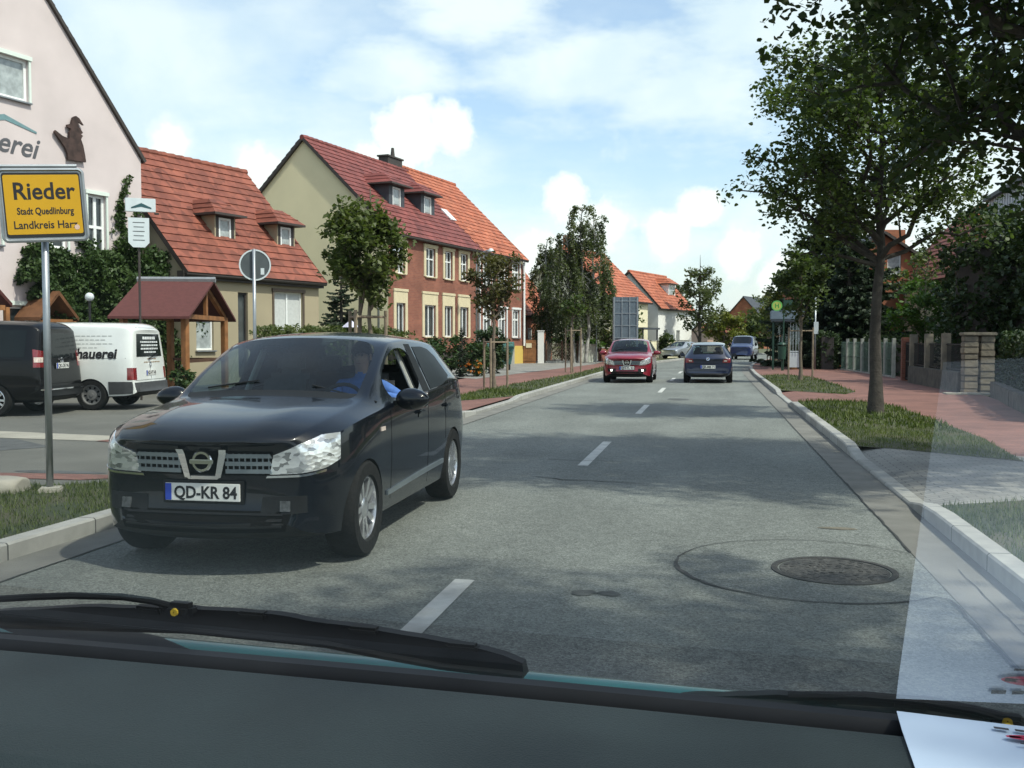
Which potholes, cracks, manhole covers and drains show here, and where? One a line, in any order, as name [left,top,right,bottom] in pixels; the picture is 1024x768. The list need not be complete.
manhole cover [771,556,899,585]
